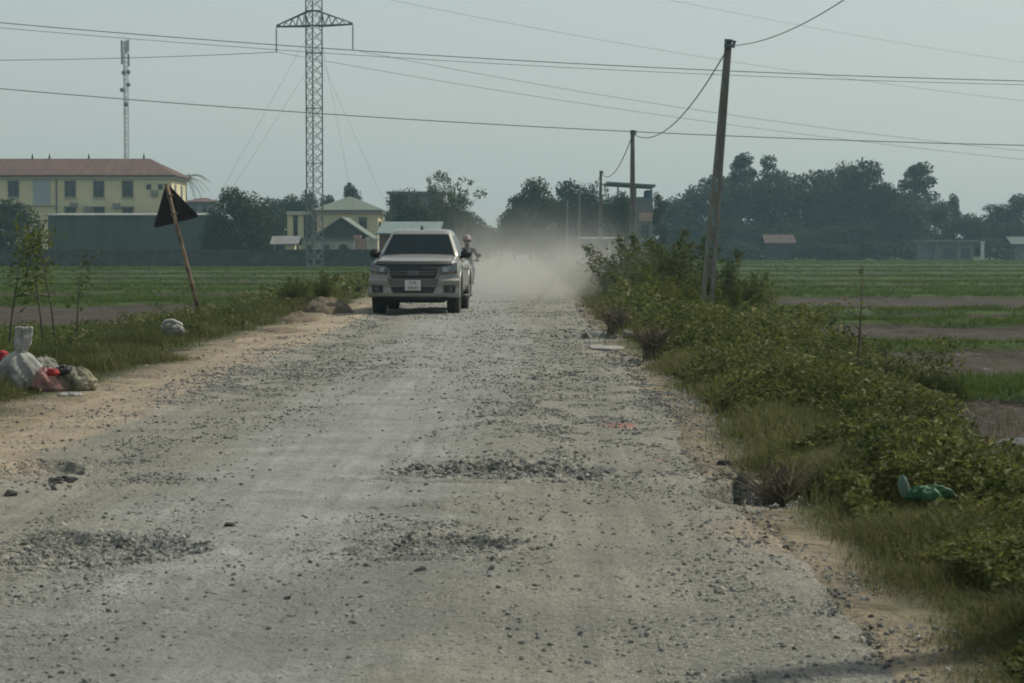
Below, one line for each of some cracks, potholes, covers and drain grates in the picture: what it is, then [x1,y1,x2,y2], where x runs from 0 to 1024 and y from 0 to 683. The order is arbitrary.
pothole [368,461,629,484]
pothole [0,527,245,581]
pothole [343,533,538,561]
